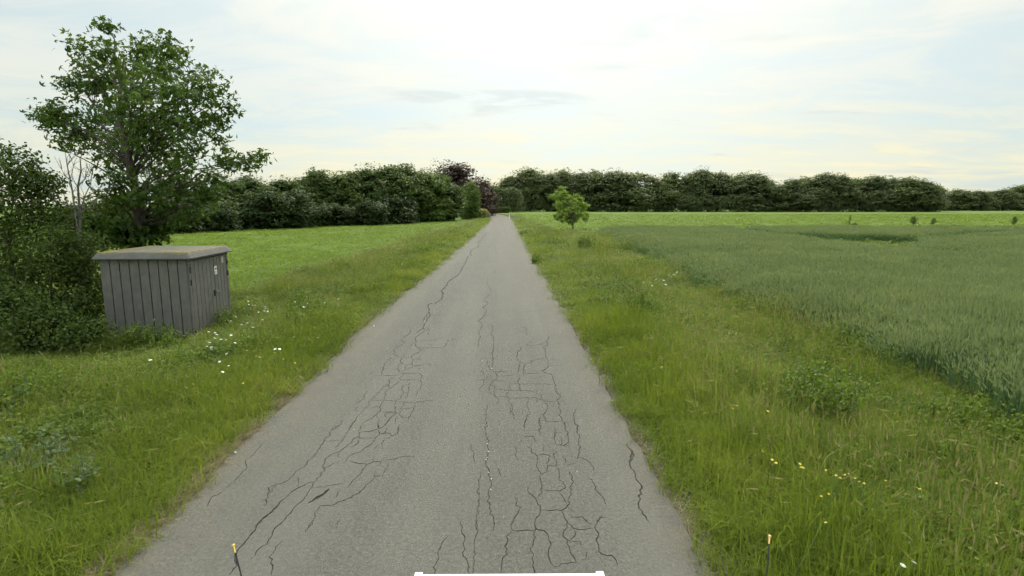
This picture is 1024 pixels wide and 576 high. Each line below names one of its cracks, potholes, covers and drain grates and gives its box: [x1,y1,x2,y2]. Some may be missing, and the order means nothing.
crack [433,326,618,574]
crack [626,443,649,522]
crack [207,236,485,576]
